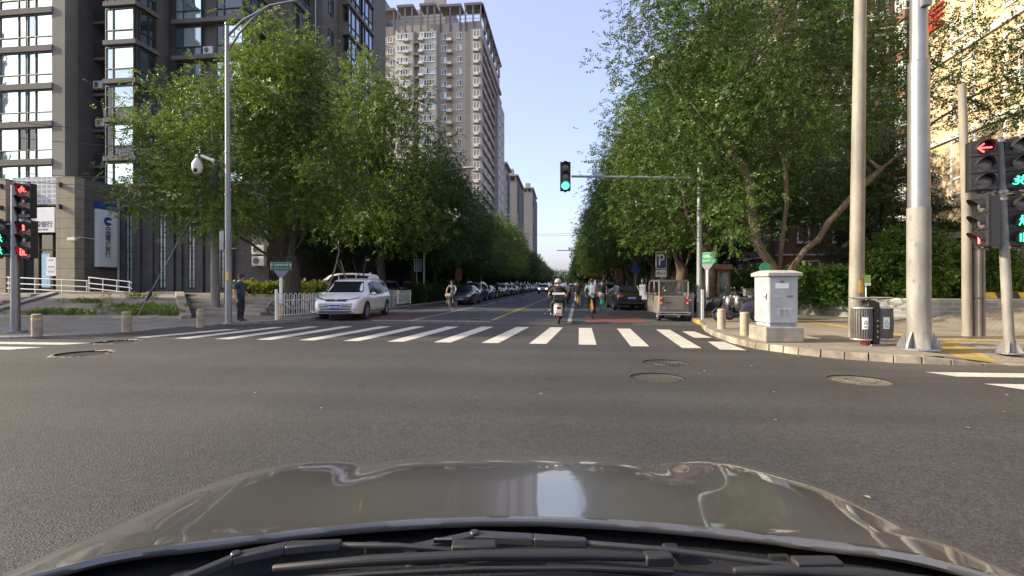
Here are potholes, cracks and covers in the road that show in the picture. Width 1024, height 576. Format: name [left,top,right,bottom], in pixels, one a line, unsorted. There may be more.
manhole cover [48,349,115,358]
manhole cover [642,359,689,367]
manhole cover [826,375,894,386]
manhole cover [630,373,686,383]
